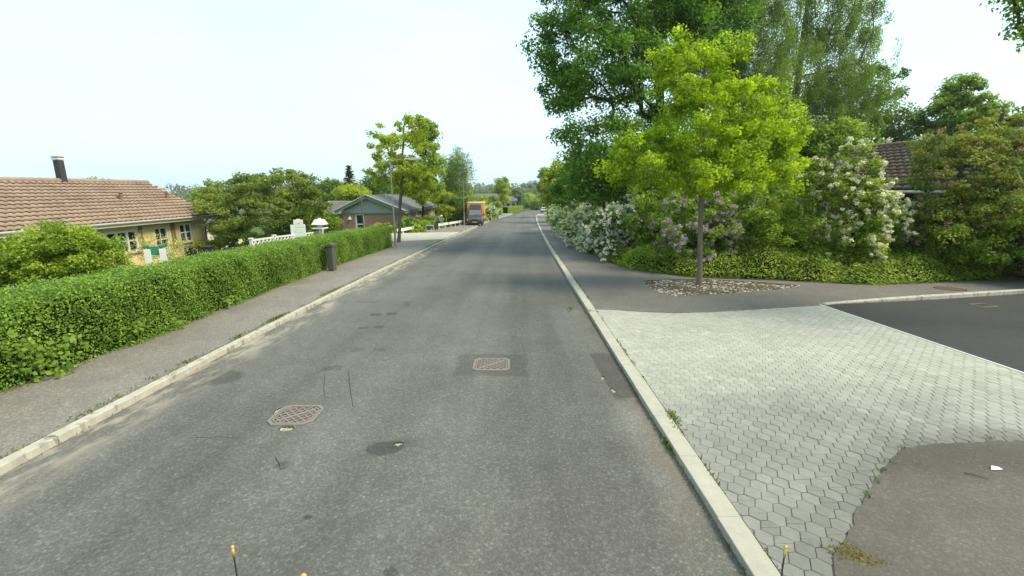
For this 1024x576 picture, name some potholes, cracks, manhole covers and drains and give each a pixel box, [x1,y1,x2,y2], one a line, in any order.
manhole cover [267,405,325,427]
manhole cover [472,358,510,371]
